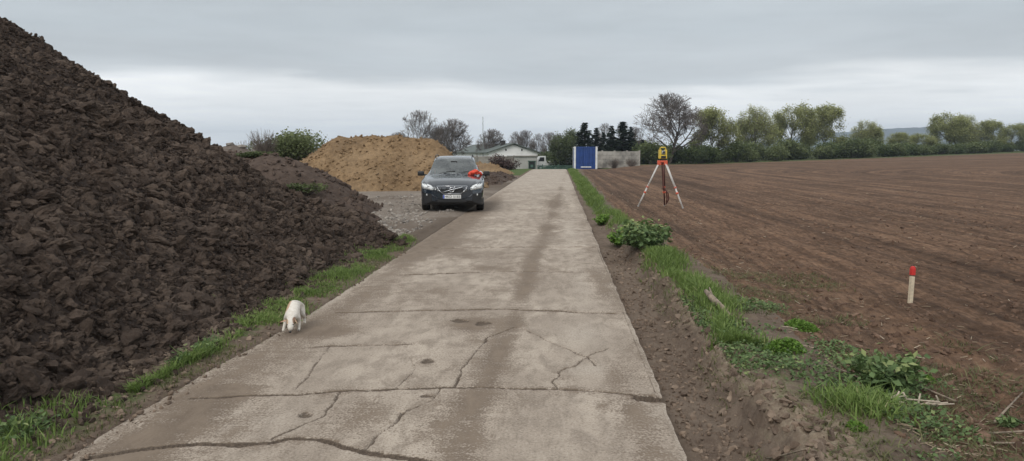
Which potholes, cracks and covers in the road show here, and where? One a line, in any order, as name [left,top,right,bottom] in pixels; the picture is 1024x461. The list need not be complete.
crack [80,327,610,461]
